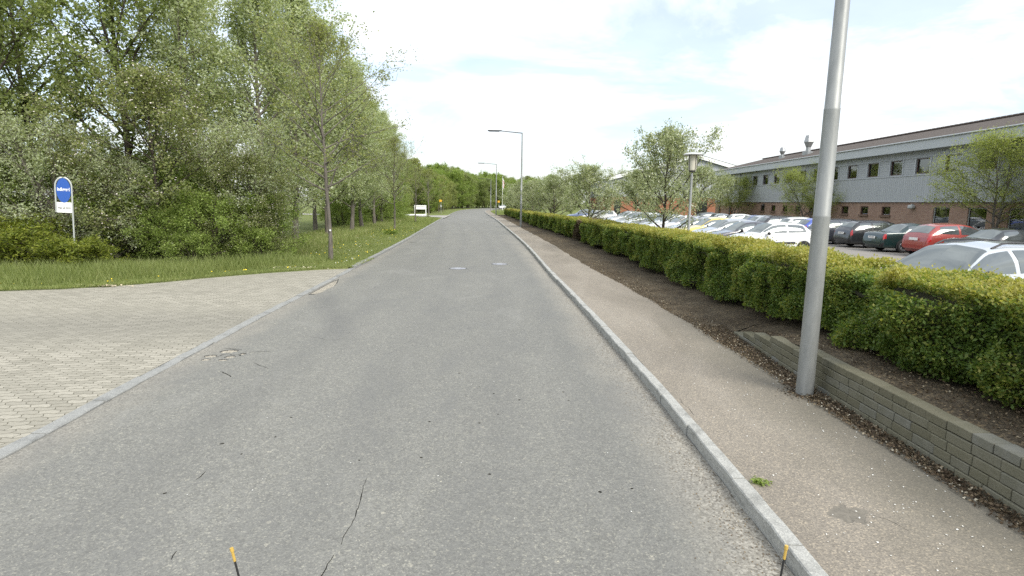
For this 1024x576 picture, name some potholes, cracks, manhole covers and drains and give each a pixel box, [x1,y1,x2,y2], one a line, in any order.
crack [321,480,366,576]
